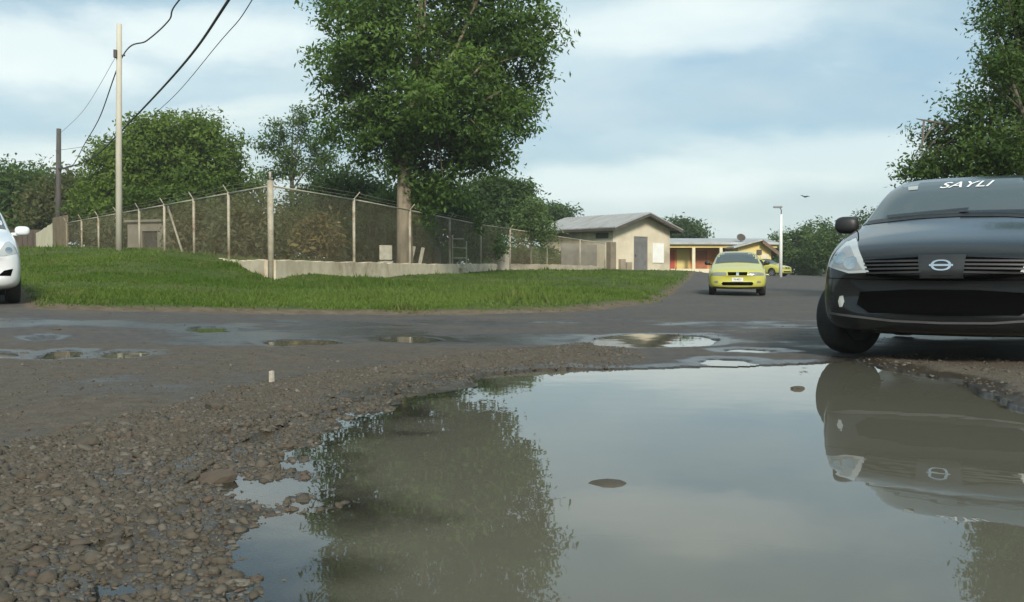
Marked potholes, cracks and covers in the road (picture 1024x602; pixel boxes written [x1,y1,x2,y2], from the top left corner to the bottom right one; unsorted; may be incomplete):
pothole [70,358,1024,602]
pothole [586,334,720,347]
